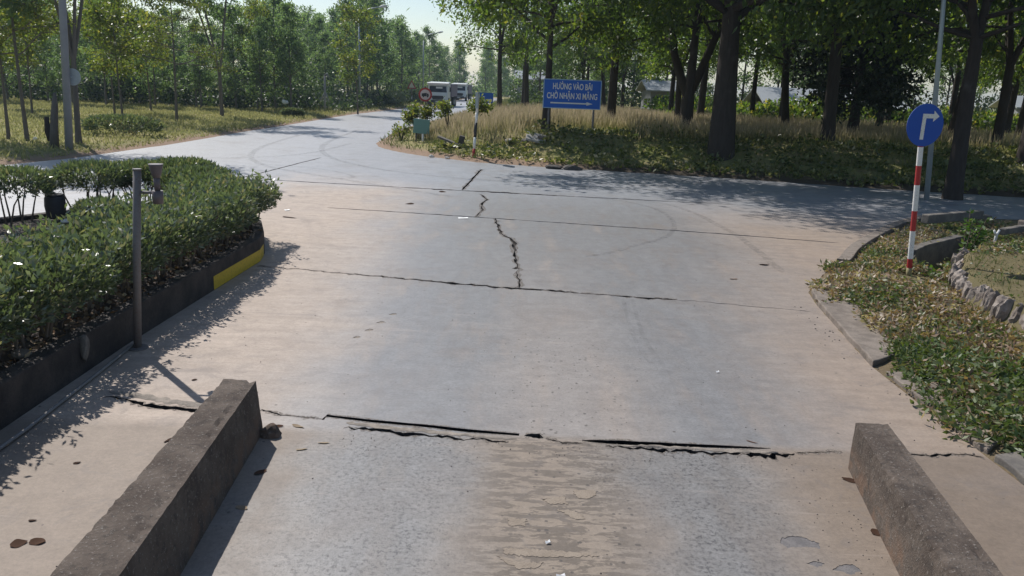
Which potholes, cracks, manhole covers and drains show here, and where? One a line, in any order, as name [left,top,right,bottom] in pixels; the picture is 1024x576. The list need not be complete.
crack [102,395,197,412]
crack [262,409,325,420]
crack [546,437,581,445]
crack [476,194,525,288]
pothole [833,564,862,575]
pothole [780,536,820,549]
